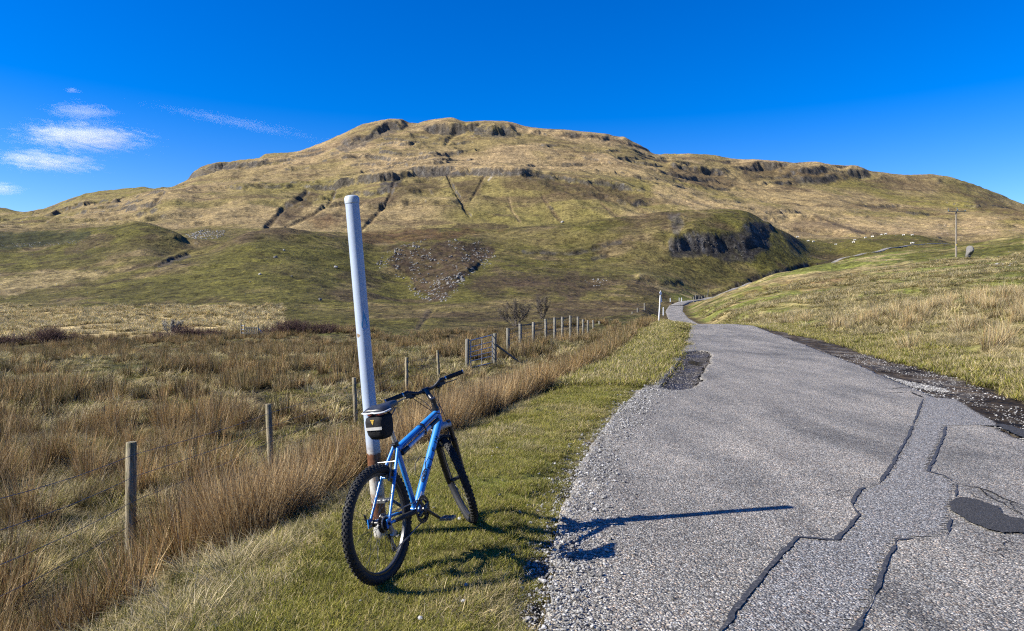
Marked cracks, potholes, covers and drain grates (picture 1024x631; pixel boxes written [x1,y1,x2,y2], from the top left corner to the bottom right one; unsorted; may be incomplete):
pothole [661,351,712,390]
